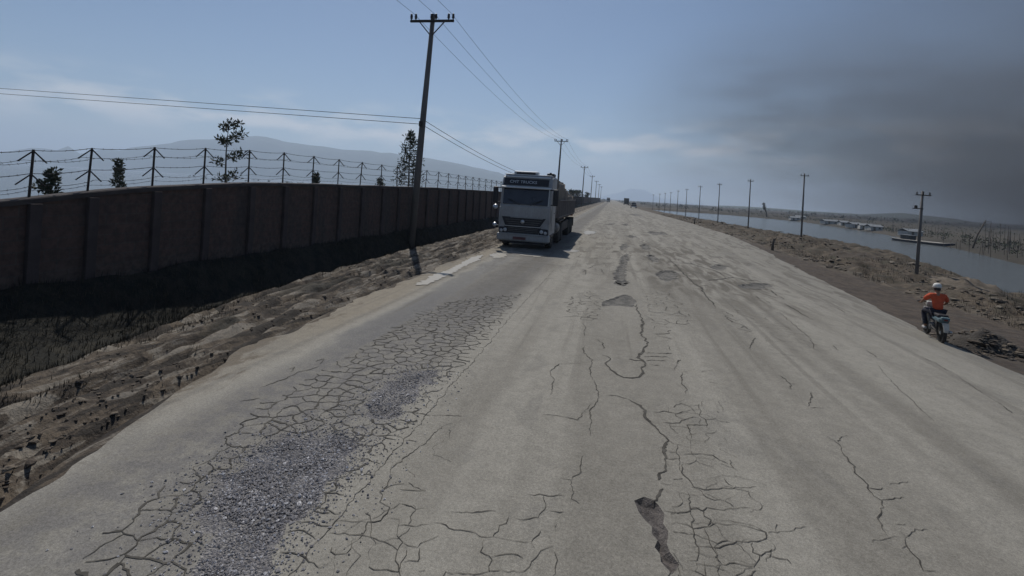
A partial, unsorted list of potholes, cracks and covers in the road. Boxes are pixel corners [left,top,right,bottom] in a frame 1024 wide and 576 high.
pothole [601,295,636,307]
crack [543,251,820,576]
pothole [634,497,679,574]
pothole [655,270,680,282]
crack [75,294,522,576]
pothole [191,432,357,576]
pothole [613,254,631,287]
crack [834,435,933,571]
crack [437,494,564,576]
